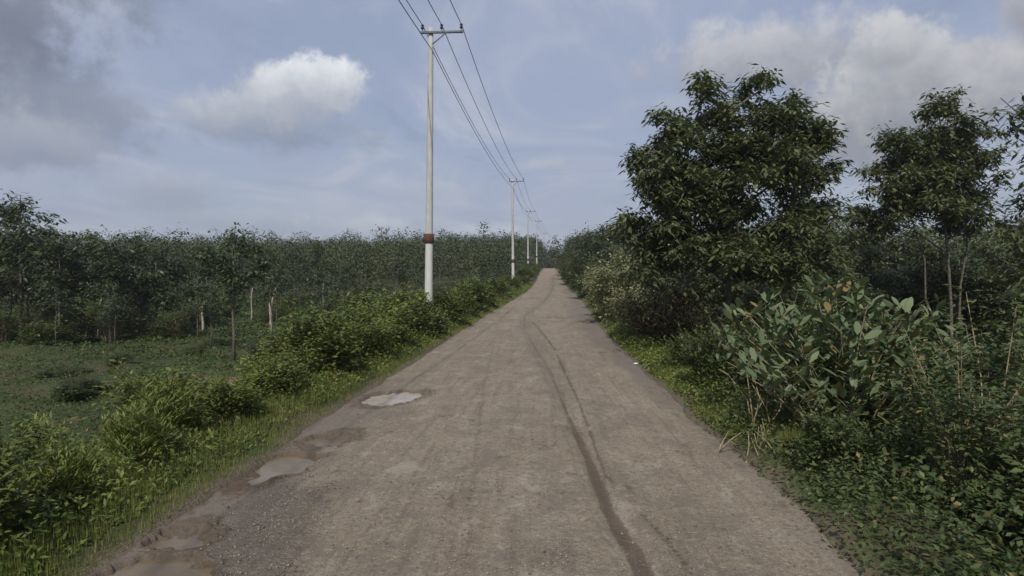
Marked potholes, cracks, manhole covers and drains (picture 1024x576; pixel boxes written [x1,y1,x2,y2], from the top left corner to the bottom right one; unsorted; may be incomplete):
pothole [89,547,228,576]
pothole [354,388,432,408]
pothole [213,449,330,500]
pothole [287,429,362,457]
pothole [133,516,232,561]
